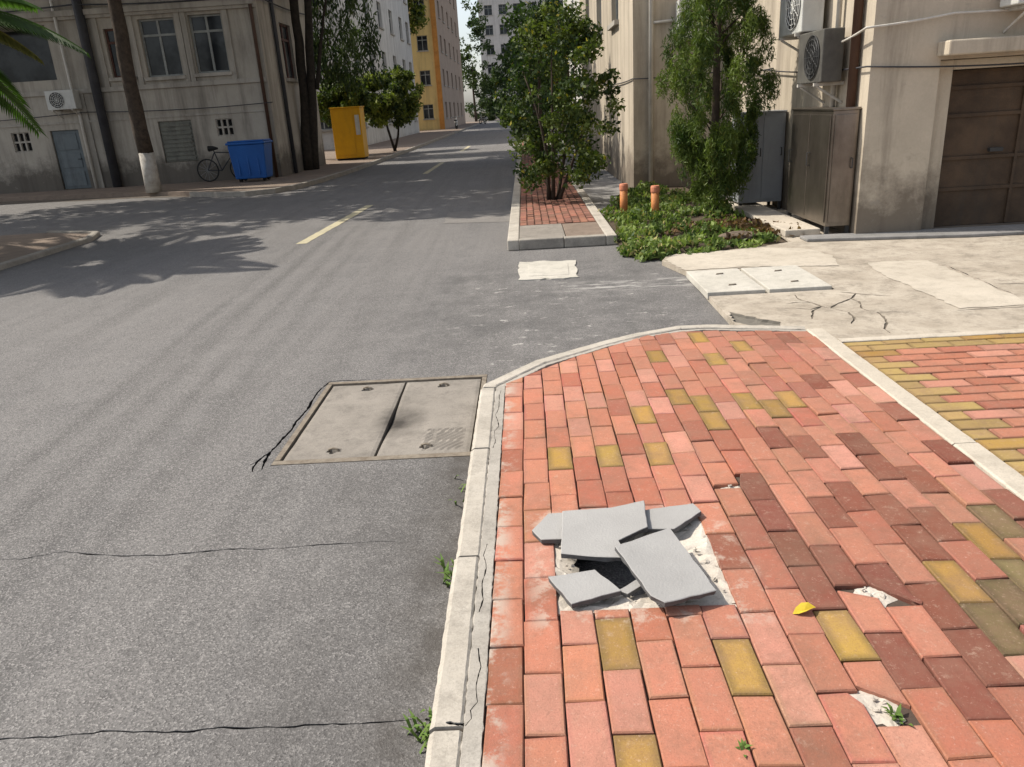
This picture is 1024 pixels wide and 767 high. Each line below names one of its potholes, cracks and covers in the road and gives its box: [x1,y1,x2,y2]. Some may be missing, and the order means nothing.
pothole [854,586,898,608]
crack [0,721,396,740]
pothole [554,517,737,616]
crack [21,544,334,560]
pothole [850,691,906,726]
manhole cover [741,265,832,293]
crack [252,380,355,472]
manhole cover [377,379,481,456]
pothole [730,313,780,326]
manhole cover [686,268,765,300]
crack [795,292,890,333]
crack [447,653,481,727]
